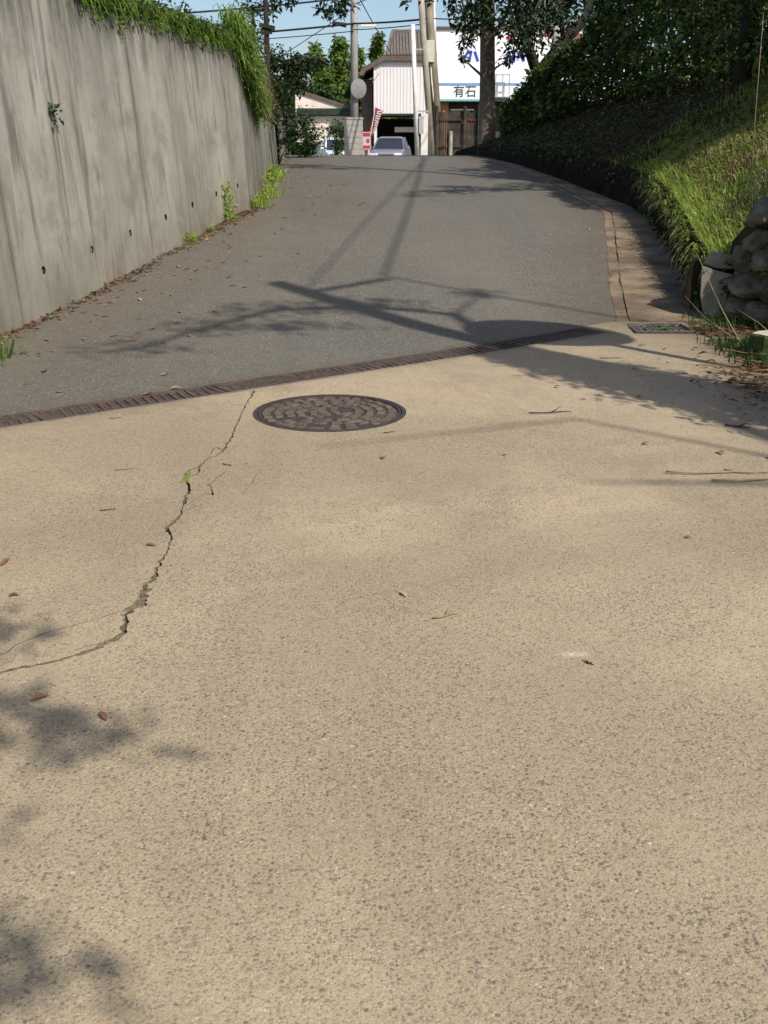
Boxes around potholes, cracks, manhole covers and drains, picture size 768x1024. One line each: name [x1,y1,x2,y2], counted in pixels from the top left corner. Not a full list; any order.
manhole cover [253,394,406,432]
drain grate [626,323,696,334]
crack [0,390,256,674]
